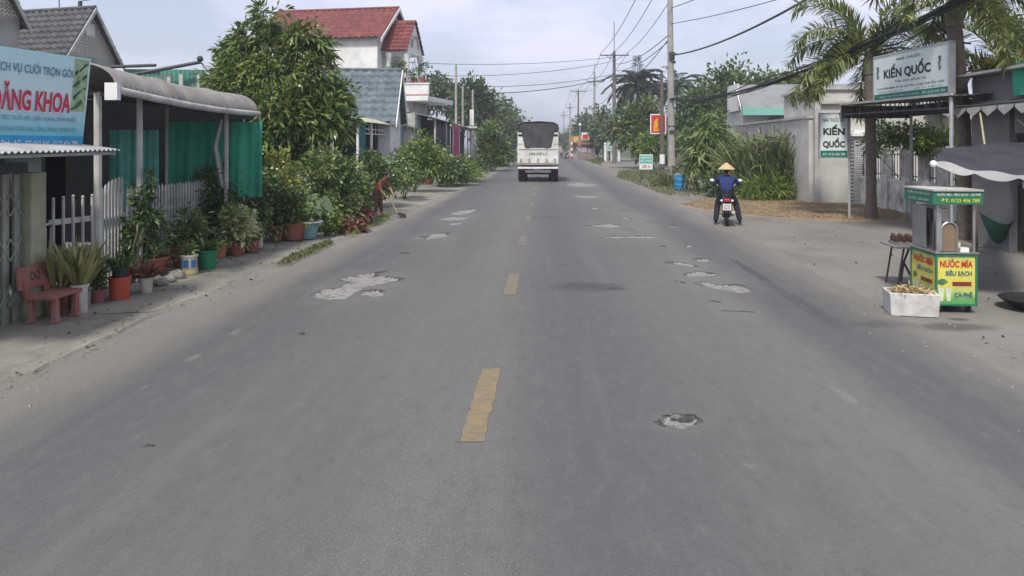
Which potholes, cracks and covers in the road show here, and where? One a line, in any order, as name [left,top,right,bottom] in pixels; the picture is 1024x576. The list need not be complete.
pothole [694,281,756,294]
pothole [306,270,404,300]
pothole [424,232,450,240]
pothole [654,412,704,430]
